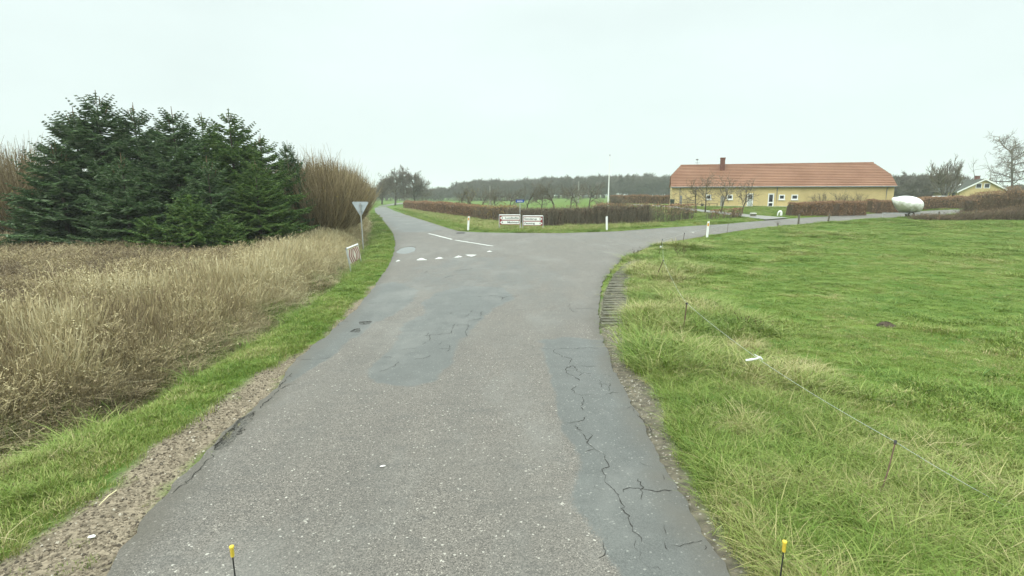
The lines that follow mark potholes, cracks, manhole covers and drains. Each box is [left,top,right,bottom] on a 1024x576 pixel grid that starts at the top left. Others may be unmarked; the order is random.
crack [542,347,670,570]
